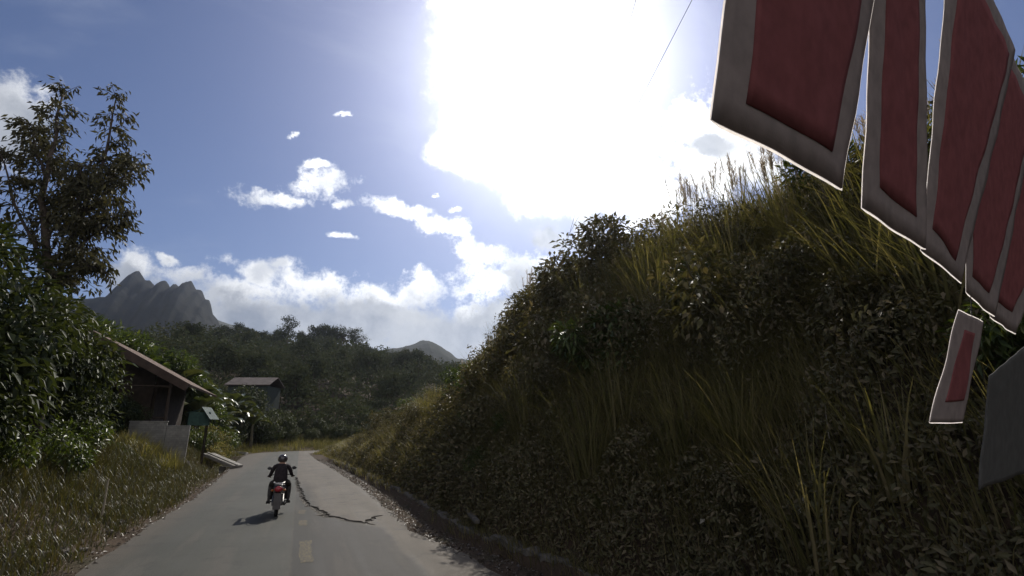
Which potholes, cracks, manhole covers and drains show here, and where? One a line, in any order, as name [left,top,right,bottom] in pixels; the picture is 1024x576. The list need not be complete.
crack [294,477,383,525]
